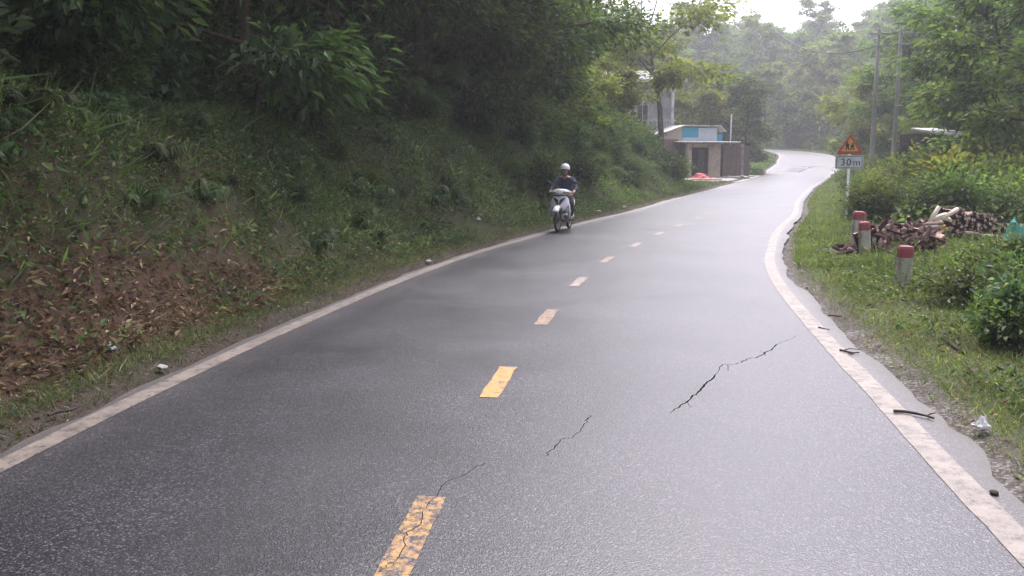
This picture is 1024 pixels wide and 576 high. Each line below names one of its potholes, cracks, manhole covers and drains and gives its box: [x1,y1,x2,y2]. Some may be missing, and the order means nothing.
crack [670,337,795,413]
crack [380,463,485,572]
